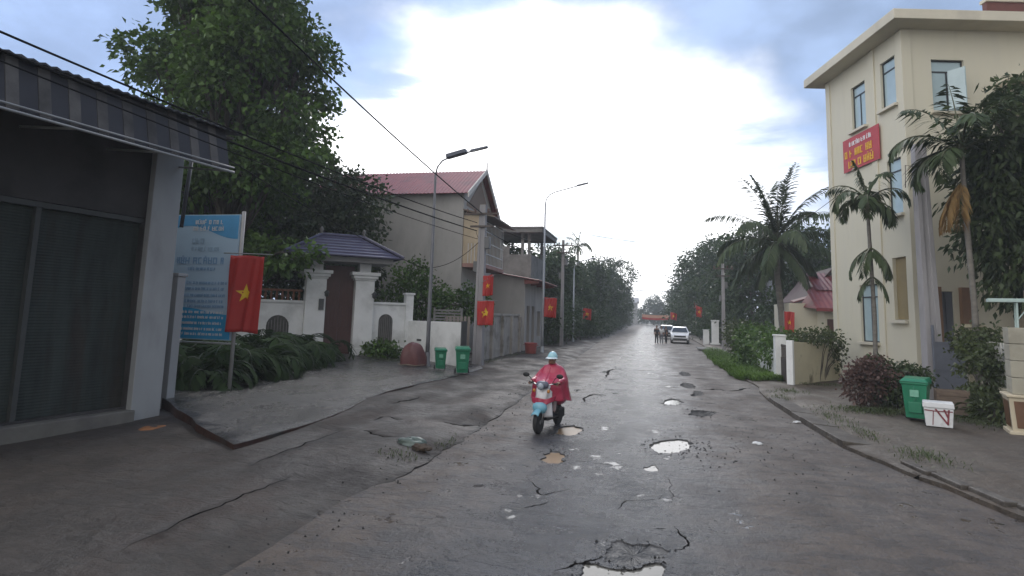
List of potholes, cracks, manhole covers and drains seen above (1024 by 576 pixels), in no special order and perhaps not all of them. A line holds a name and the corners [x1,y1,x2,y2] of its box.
pothole [580,562,667,576]
crack [655,525,690,552]
pothole [540,451,566,463]
crack [525,479,568,508]
crack [582,368,659,403]
crack [554,557,603,571]
pothole [649,439,694,453]
pothole [552,425,584,436]
